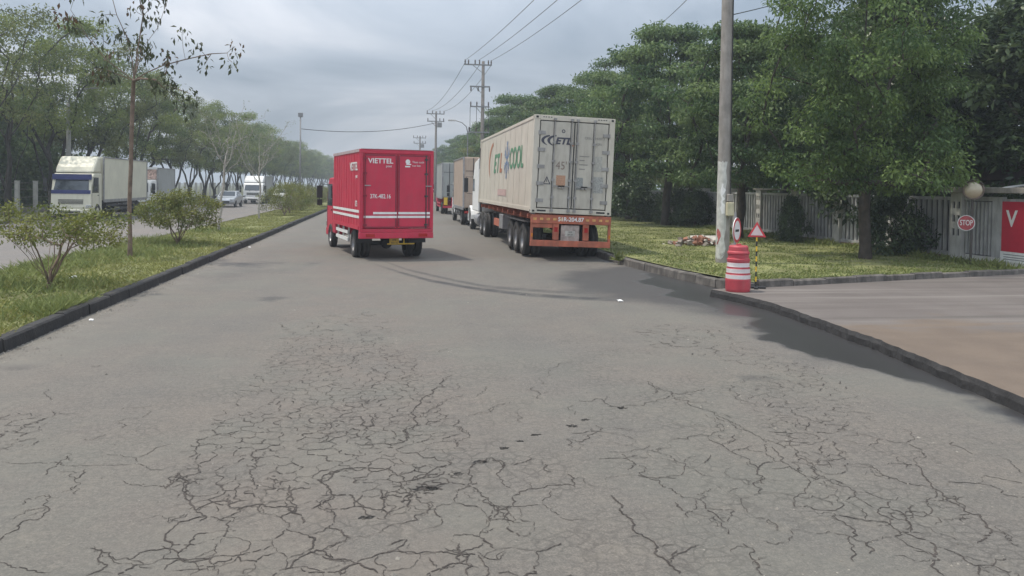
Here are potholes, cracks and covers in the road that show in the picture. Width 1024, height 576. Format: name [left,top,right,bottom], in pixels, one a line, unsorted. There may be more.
crack [568,360,1021,576]
crack [0,312,584,576]
